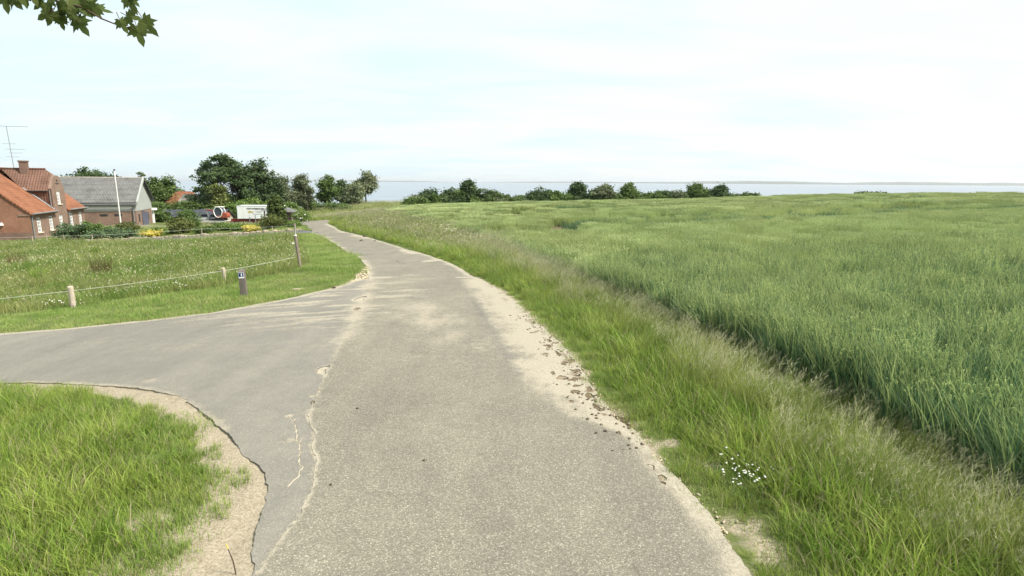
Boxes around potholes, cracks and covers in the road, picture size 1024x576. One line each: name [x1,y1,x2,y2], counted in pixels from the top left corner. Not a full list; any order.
crack [284,416,304,488]
